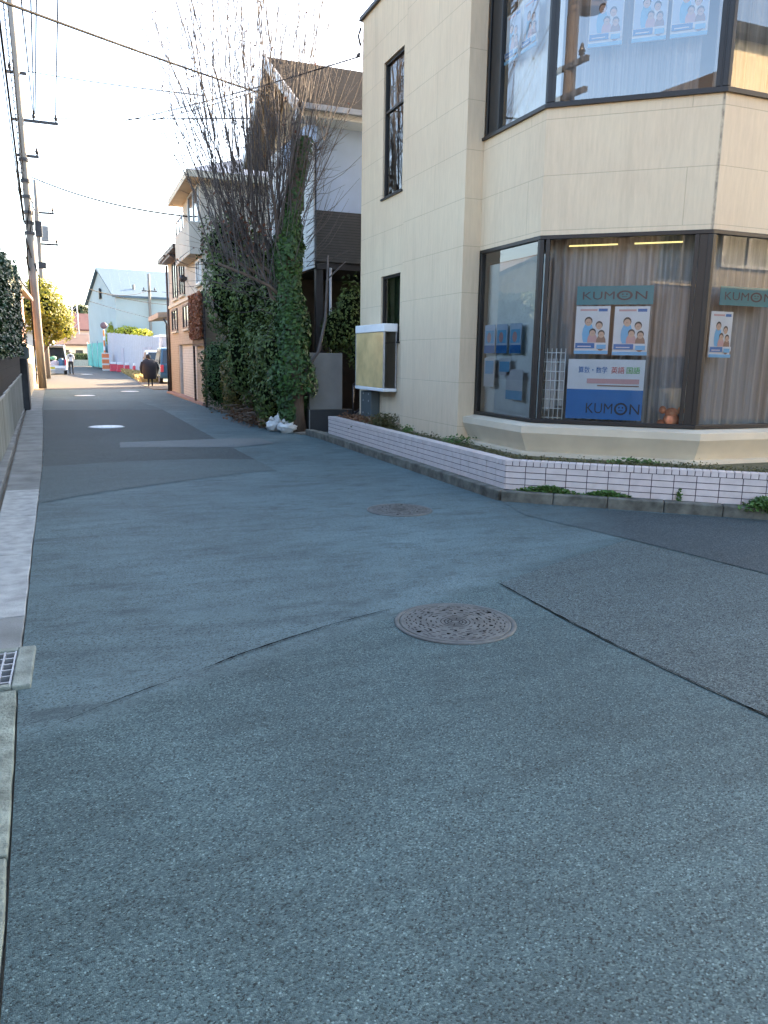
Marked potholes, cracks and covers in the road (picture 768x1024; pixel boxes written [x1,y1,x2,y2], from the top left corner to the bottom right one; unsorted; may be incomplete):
drain grate [0,645,36,696]
manhole cover [367,503,432,517]
manhole cover [395,603,517,645]
